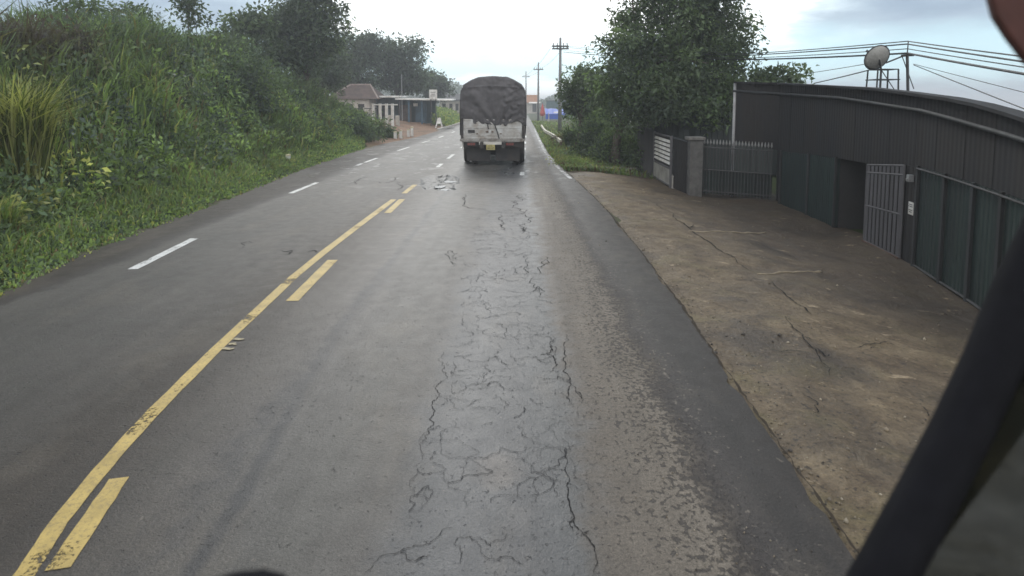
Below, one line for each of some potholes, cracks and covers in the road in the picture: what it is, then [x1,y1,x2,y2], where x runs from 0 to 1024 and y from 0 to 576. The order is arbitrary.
crack [657,205,754,272]
pothole [419,174,460,191]
crack [408,209,598,572]
crack [365,527,518,572]
crack [771,286,830,371]
